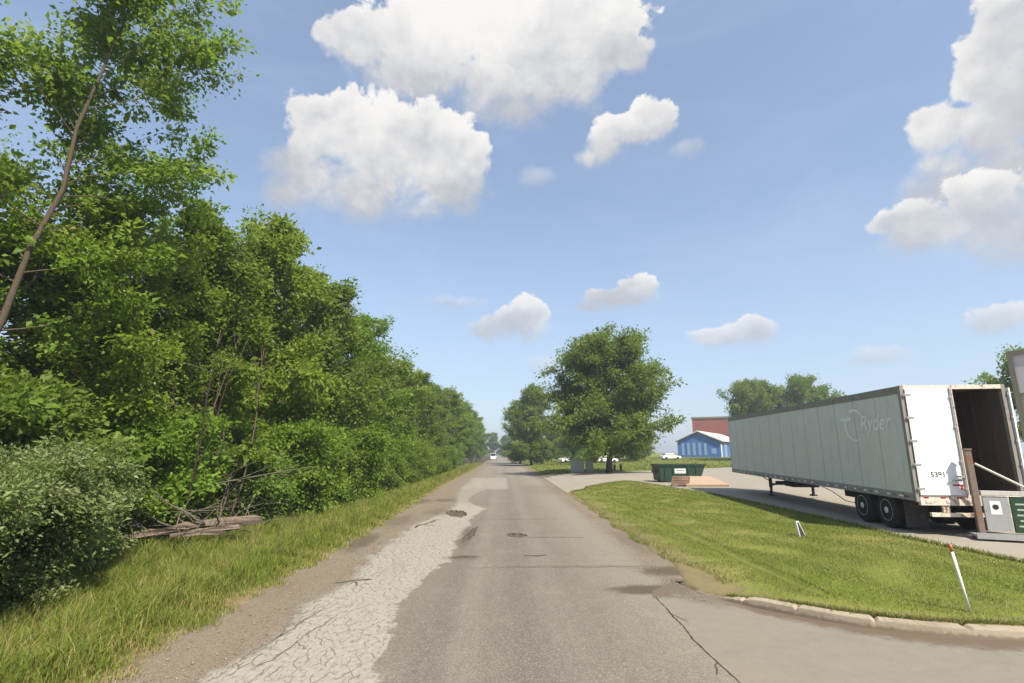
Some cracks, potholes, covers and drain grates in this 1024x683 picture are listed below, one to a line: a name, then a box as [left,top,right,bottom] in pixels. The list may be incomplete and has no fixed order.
pothole [445,510,467,518]
crack [205,515,468,683]
